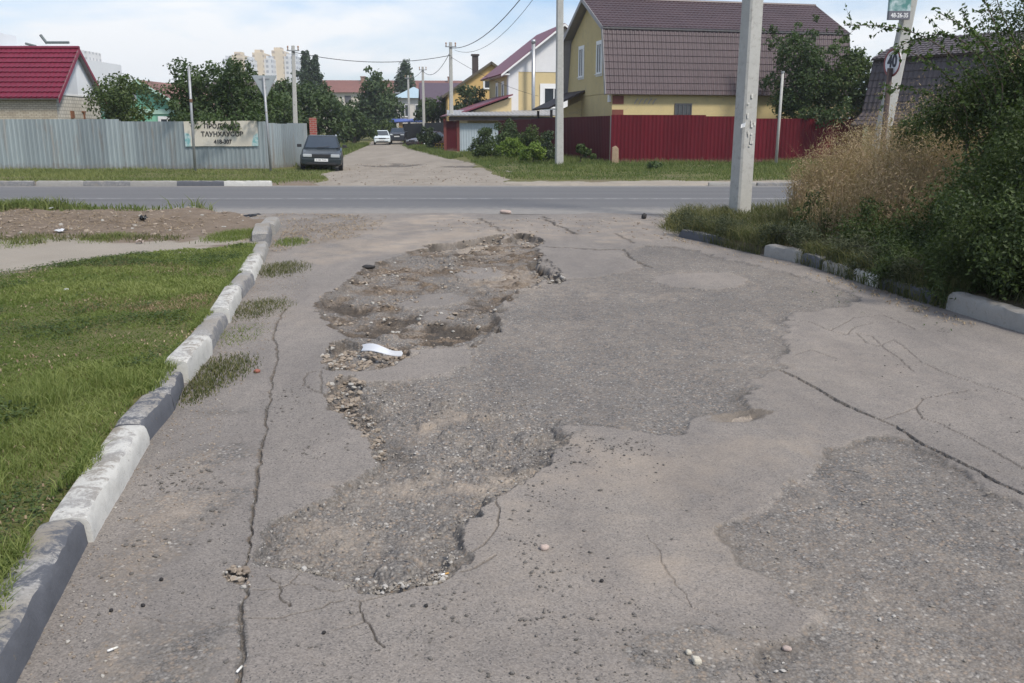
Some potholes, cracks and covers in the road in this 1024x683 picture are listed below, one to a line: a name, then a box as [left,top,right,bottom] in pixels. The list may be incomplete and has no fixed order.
crack [778,314,1024,495]
pothole [320,339,420,372]
crack [143,307,394,683]
pothole [527,259,566,284]
crack [645,534,721,616]
pothole [422,234,505,255]
pothole [312,238,547,354]
pothole [251,377,572,595]
pothole [509,233,546,248]
crack [540,216,654,268]
